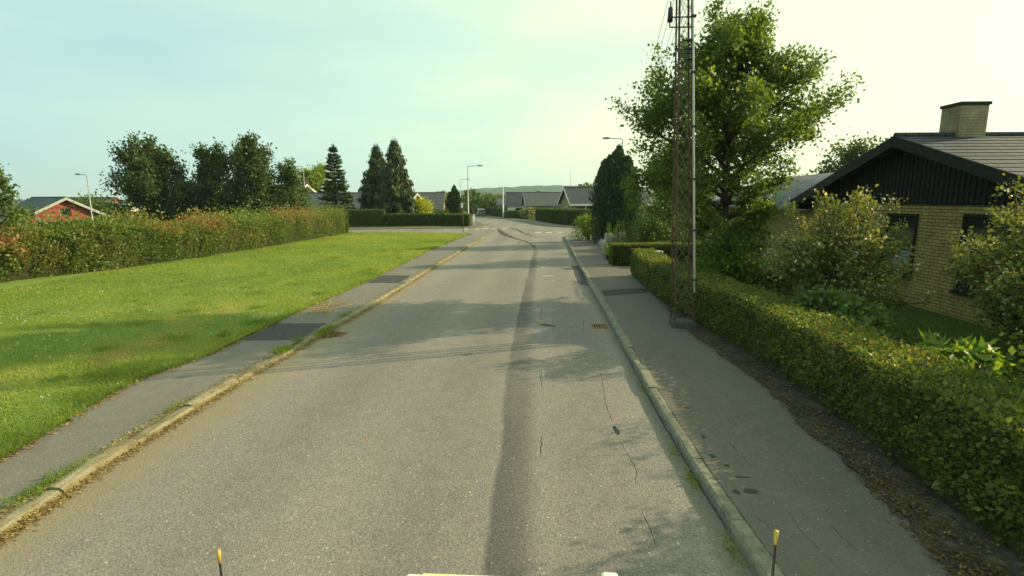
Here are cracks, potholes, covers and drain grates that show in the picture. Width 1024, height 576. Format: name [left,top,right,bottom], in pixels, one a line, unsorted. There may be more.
crack [752,510,867,566]
